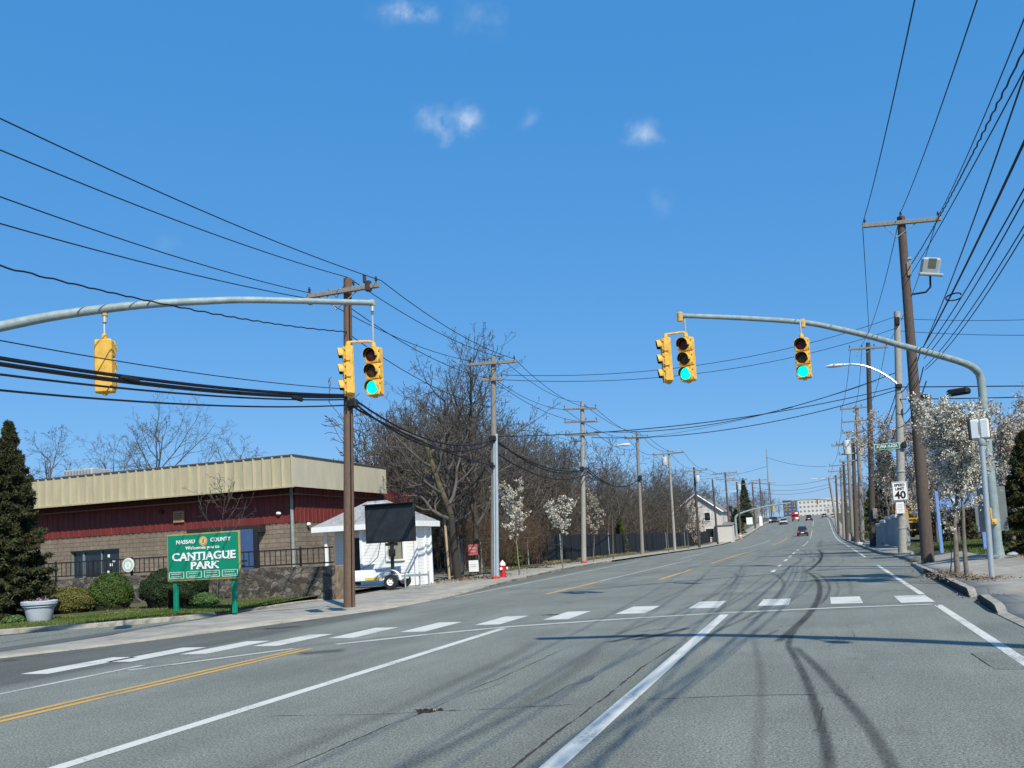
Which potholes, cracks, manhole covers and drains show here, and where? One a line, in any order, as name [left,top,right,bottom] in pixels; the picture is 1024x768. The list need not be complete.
crack [281,651,874,768]
